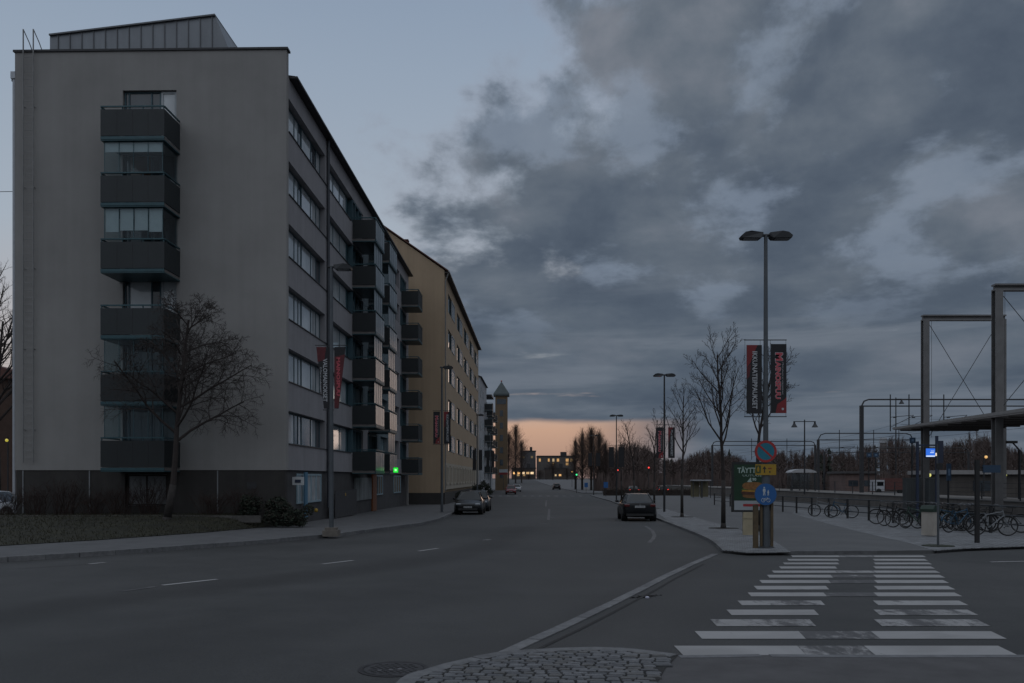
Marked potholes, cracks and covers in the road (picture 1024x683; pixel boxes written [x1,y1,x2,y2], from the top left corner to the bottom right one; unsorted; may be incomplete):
manhole cover [358,661,429,677]
